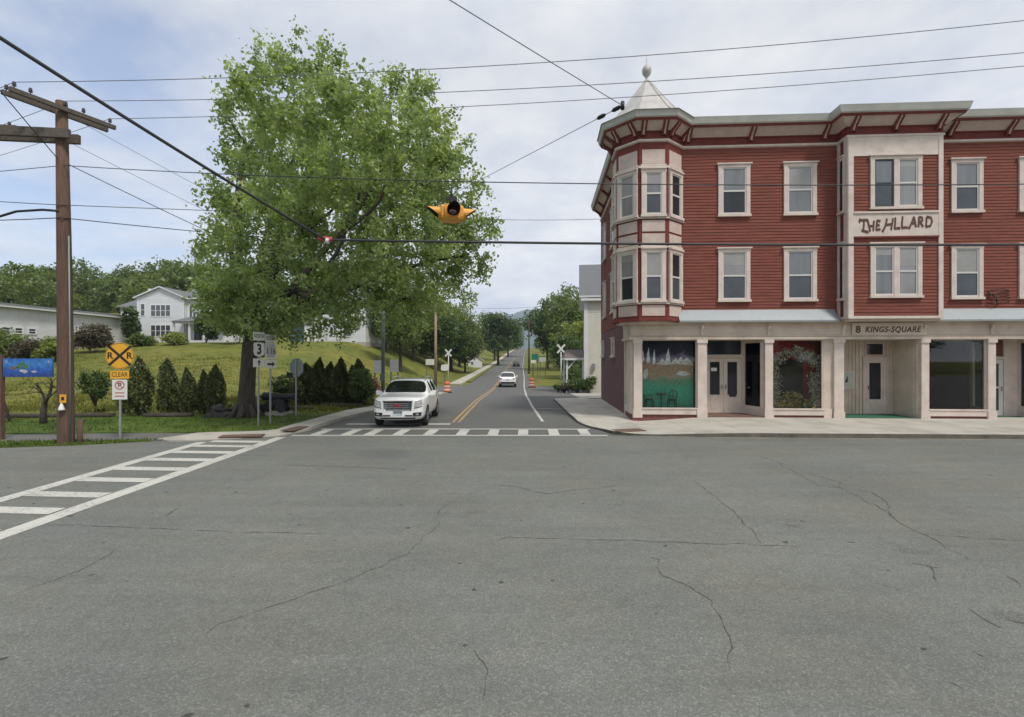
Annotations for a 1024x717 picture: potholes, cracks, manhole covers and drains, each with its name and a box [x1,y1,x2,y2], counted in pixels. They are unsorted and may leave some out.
crack [502,483,800,667]
crack [208,487,489,632]
crack [765,457,1005,558]
crack [53,509,324,534]
